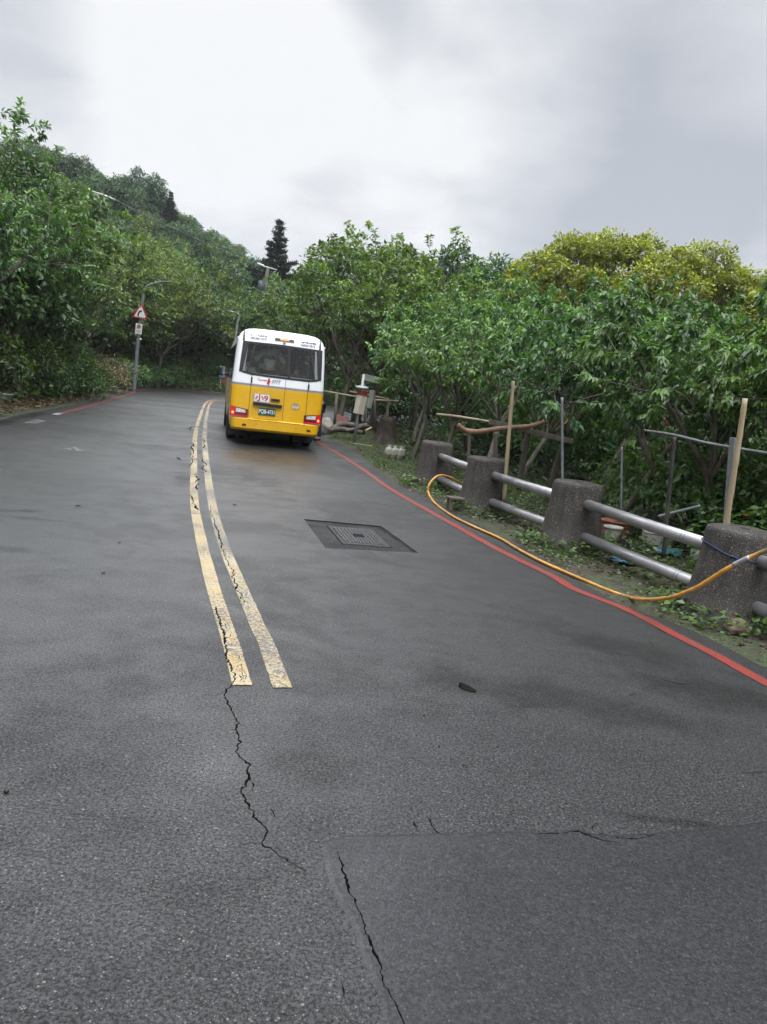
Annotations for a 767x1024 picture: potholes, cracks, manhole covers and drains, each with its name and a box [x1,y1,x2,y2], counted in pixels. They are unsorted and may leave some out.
crack [188,426,306,872]
crack [337,851,404,1024]
manhole cover [327,526,393,548]
